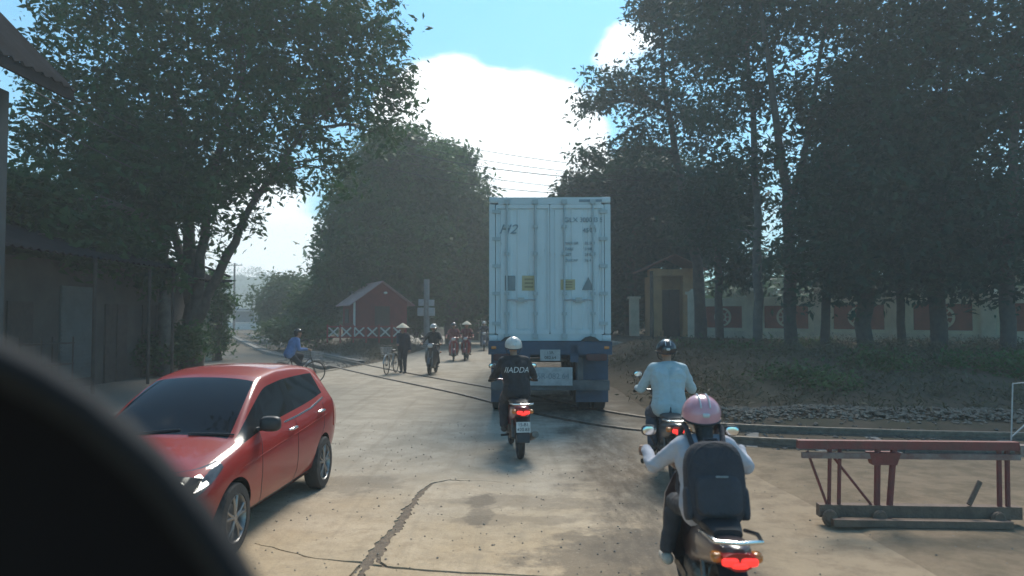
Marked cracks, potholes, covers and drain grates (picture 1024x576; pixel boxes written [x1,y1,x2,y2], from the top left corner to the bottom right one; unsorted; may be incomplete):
crack [351,481,489,576]
